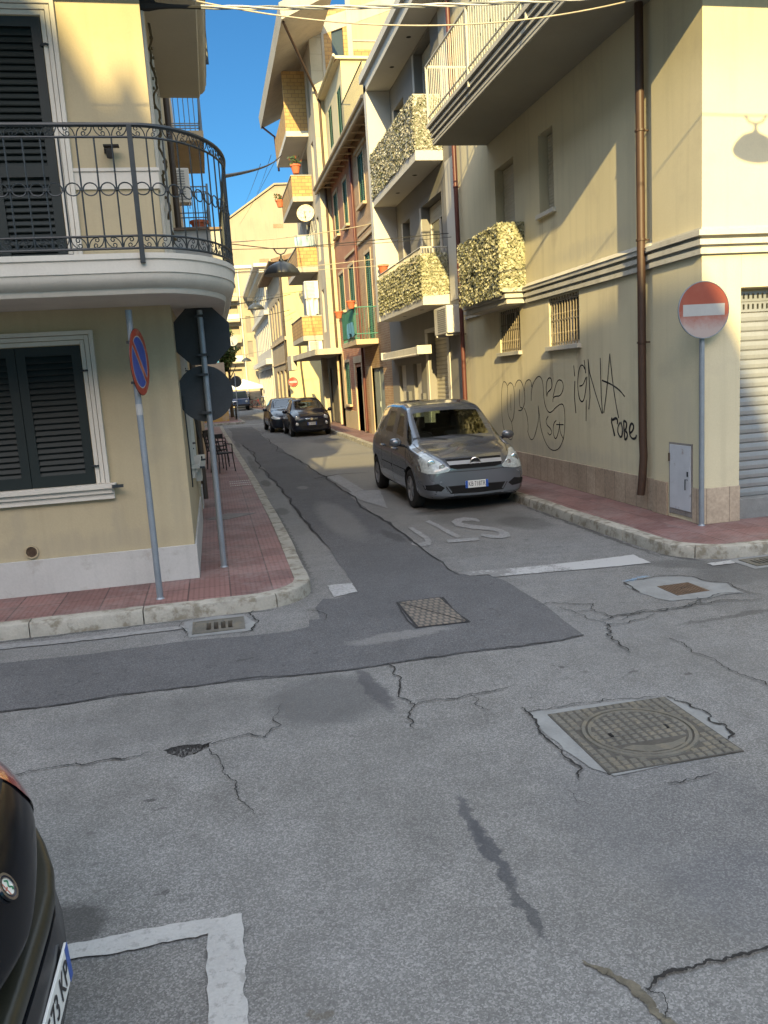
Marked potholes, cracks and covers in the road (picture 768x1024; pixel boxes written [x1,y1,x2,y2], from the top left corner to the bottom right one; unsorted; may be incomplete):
manhole cover [398,597,468,628]
crack [15,752,147,775]
crack [209,707,282,813]
drain grate [731,554,768,569]
crack [389,664,510,728]
pothole [163,742,211,758]
crack [670,638,767,685]
drain grate [184,614,256,638]
manhole cover [531,697,744,776]
manhole cover [625,576,744,601]
crack [546,575,764,653]
crack [582,945,768,1024]
